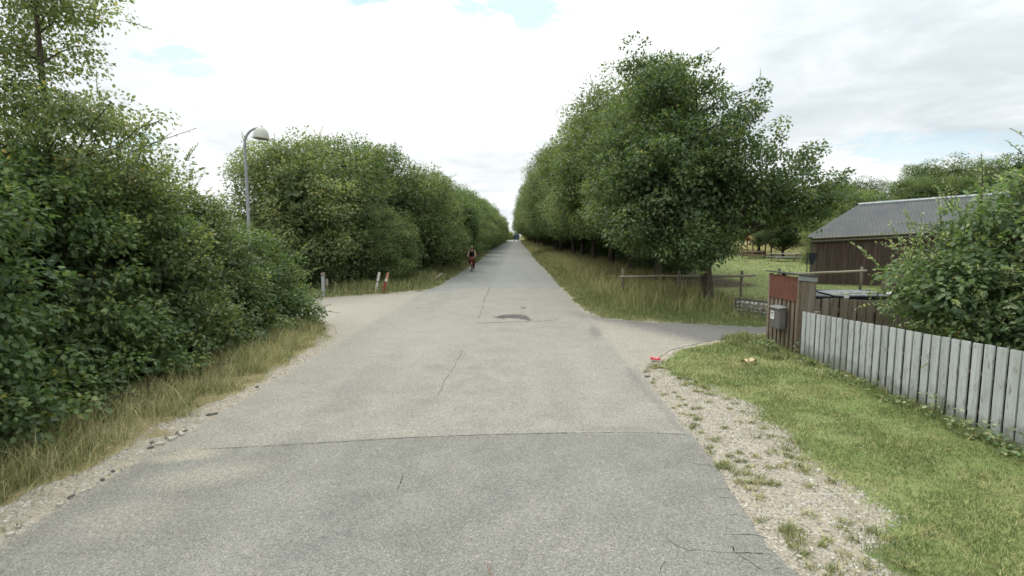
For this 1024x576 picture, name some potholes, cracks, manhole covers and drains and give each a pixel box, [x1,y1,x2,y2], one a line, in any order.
crack [660,488,777,573]
